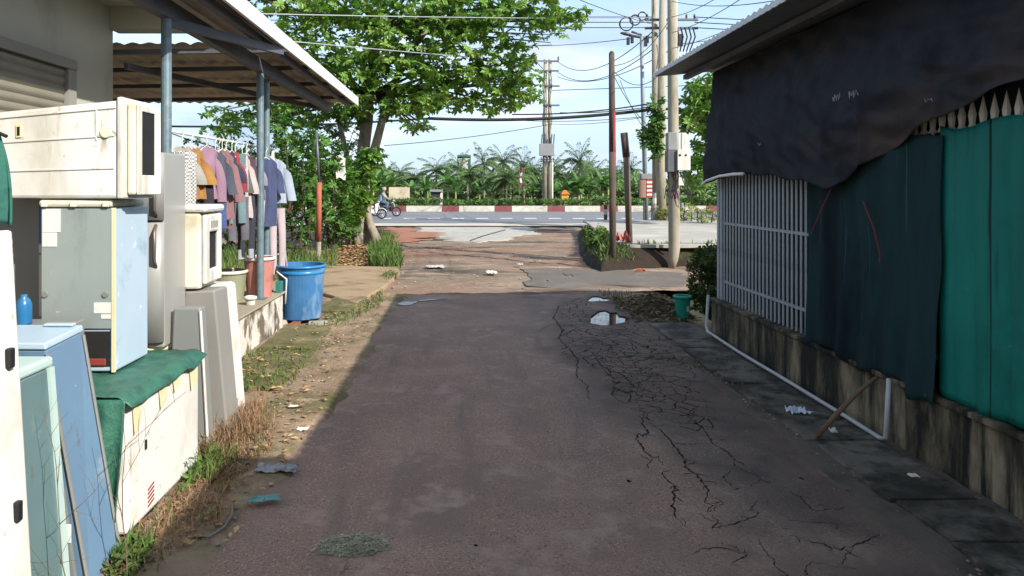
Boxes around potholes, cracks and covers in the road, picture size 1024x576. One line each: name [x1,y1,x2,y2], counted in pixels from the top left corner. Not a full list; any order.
pothole [589,310,630,325]
crack [538,298,880,576]
